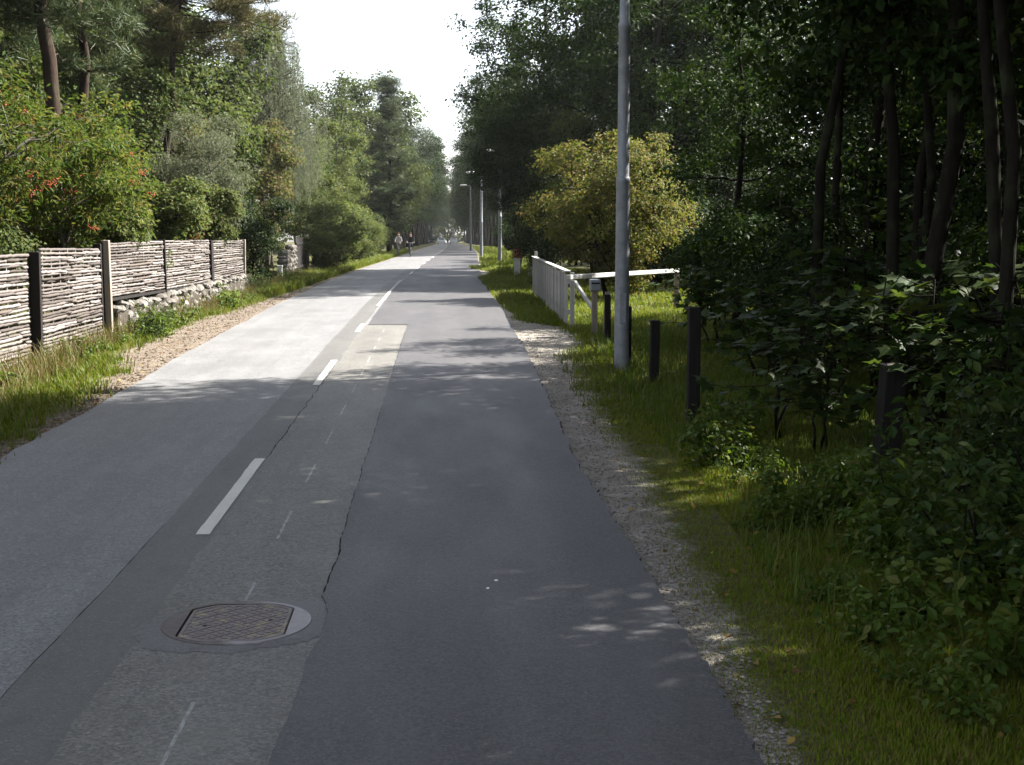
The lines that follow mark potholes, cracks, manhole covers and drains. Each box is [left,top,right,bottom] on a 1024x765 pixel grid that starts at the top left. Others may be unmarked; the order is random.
crack [321,407,382,597]
manhole cover [132,599,327,654]
